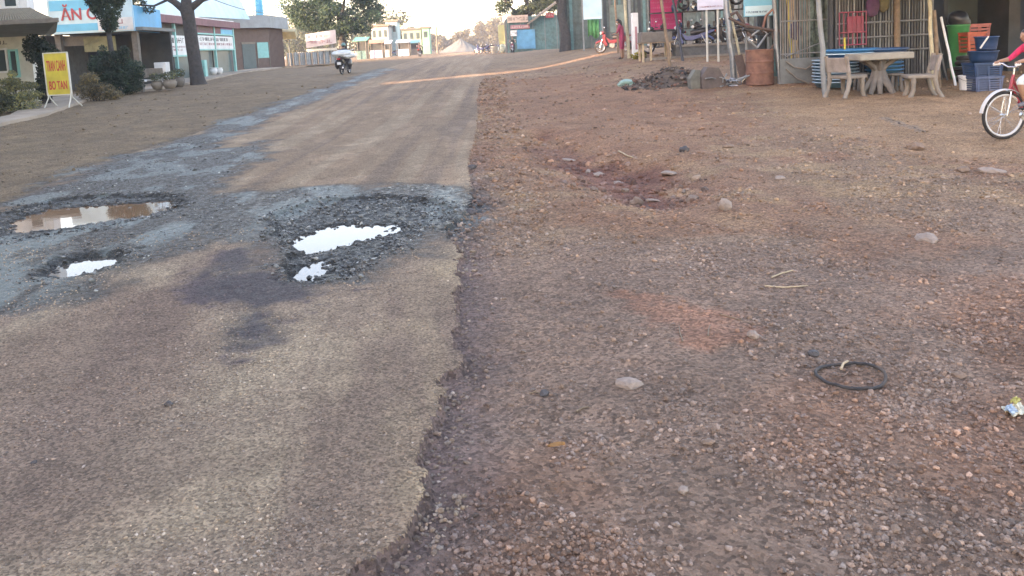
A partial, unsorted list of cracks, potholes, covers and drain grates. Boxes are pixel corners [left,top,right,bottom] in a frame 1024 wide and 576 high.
pothole [0,191,202,245]
pothole [16,244,151,285]
pothole [252,192,464,287]
